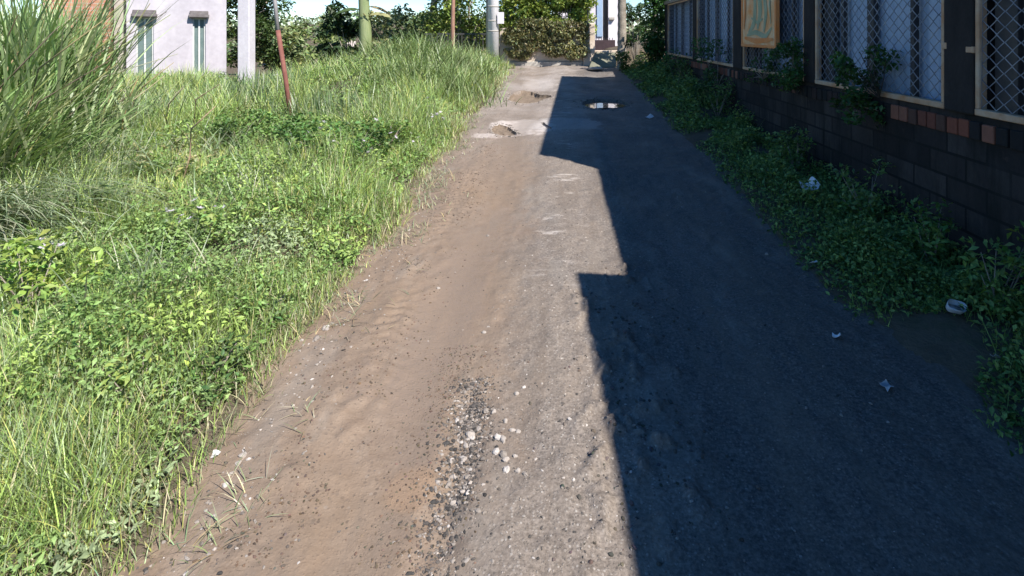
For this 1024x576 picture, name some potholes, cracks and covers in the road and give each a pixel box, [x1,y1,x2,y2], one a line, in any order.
pothole [505,90,553,104]
pothole [579,98,631,110]
pothole [491,124,518,137]
